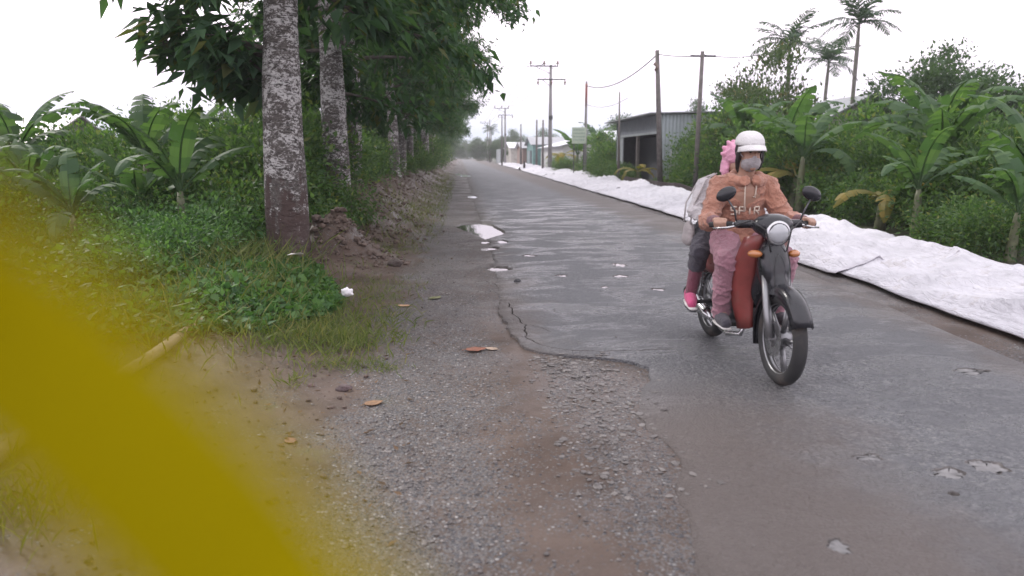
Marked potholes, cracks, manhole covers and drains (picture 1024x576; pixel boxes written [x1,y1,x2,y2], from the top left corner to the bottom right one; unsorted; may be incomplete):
pothole [455,223,505,239]
crack [508,304,657,352]
pothole [826,538,853,554]
pothole [964,459,1012,475]
pothole [931,466,967,479]
